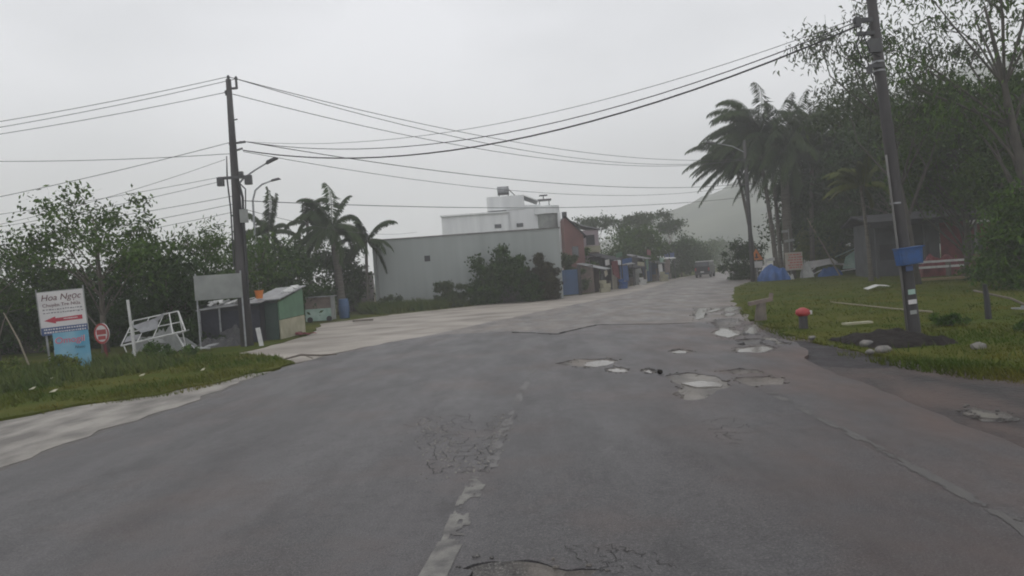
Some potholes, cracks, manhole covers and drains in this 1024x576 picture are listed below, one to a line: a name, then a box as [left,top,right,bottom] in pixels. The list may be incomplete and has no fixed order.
crack [404,415,517,474]
pothole [456,554,609,576]
pothole [731,374,790,387]
pothole [559,357,622,368]
pothole [714,367,765,375]
crack [565,544,677,574]
pothole [689,308,712,321]
pothole [956,404,1020,422]
pothole [666,370,731,400]
pothole [712,326,747,339]
pothole [604,365,630,373]
pothole [731,345,779,353]
